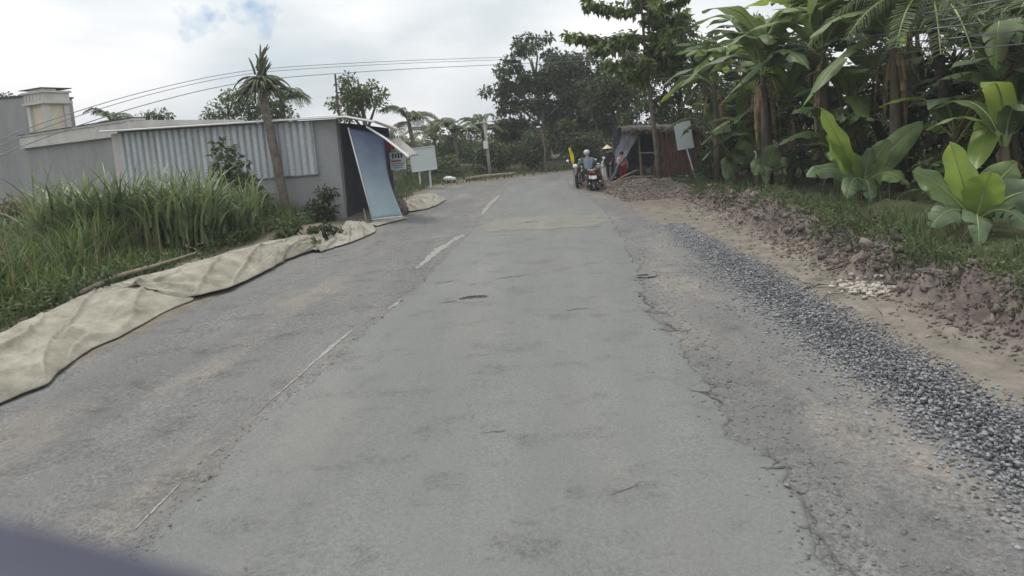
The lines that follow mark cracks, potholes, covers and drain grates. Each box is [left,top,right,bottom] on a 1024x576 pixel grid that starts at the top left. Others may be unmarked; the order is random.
crack [637,291,683,330]
crack [690,379,723,402]
crack [762,445,859,576]
pothole [452,293,495,303]
